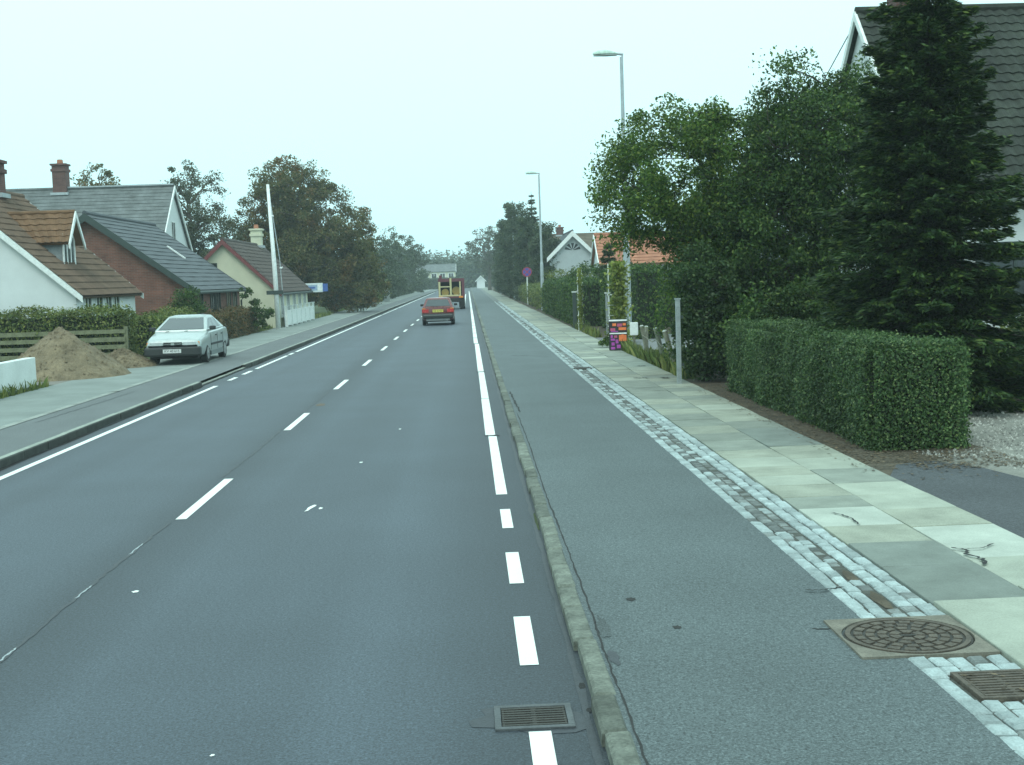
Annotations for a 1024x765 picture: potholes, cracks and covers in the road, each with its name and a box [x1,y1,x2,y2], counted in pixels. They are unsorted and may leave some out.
drain grate [494,703,576,732]
manhole cover [823,615,1000,660]
drain grate [950,669,1024,702]
crack [951,543,993,564]
